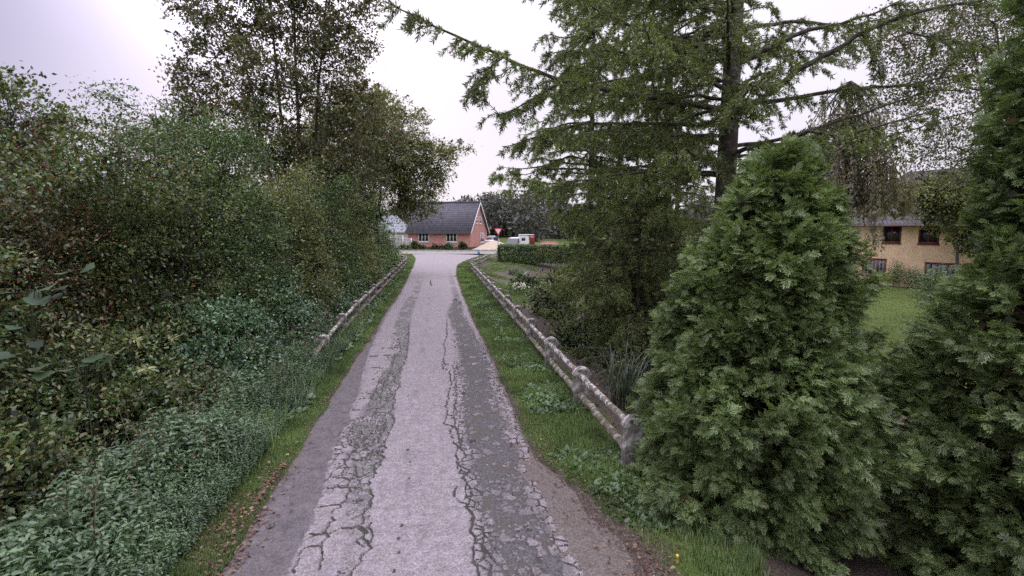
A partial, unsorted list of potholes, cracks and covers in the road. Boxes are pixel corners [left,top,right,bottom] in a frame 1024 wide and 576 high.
crack [292,280,582,576]
